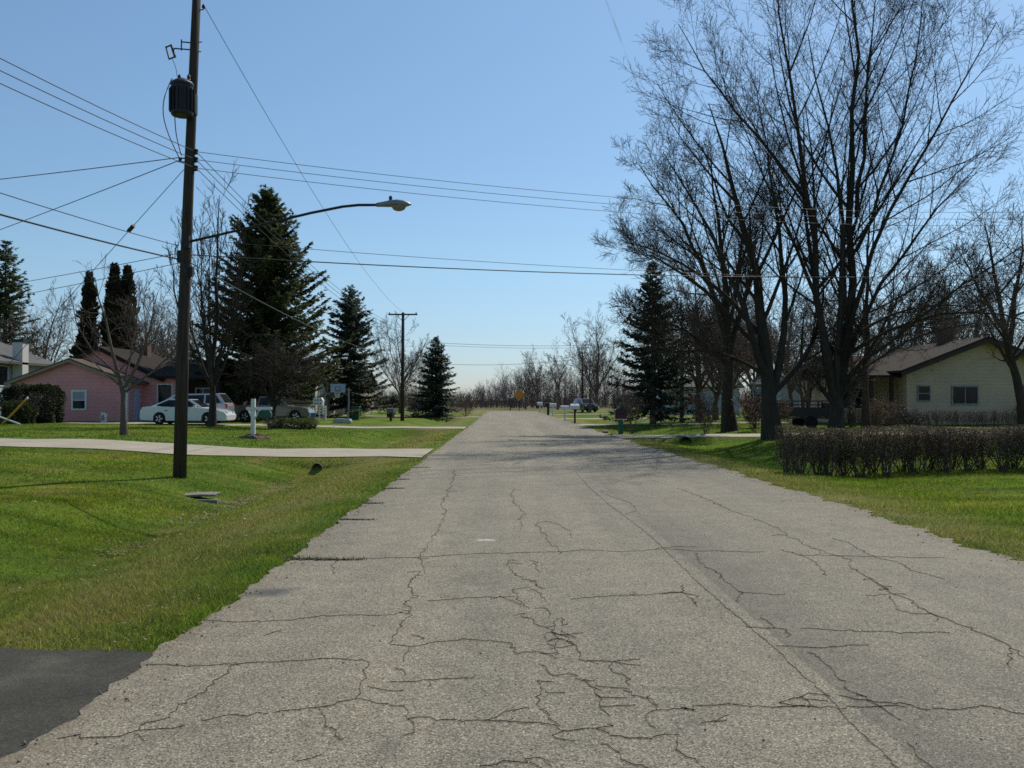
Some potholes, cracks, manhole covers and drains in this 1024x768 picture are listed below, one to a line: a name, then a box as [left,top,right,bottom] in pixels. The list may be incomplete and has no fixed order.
crack [57,470,1024,768]
